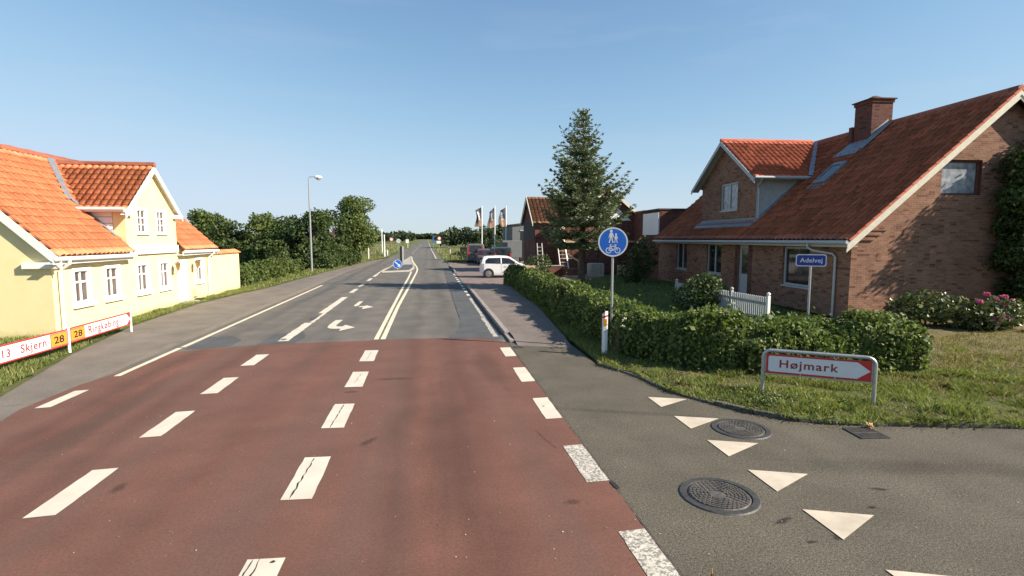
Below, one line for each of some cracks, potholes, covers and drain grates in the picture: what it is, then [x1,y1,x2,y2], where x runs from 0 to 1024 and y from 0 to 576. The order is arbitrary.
manhole cover [679,477,762,516]
crack [287,459,314,499]
drain grate [842,427,890,439]
manhole cover [711,419,772,440]
